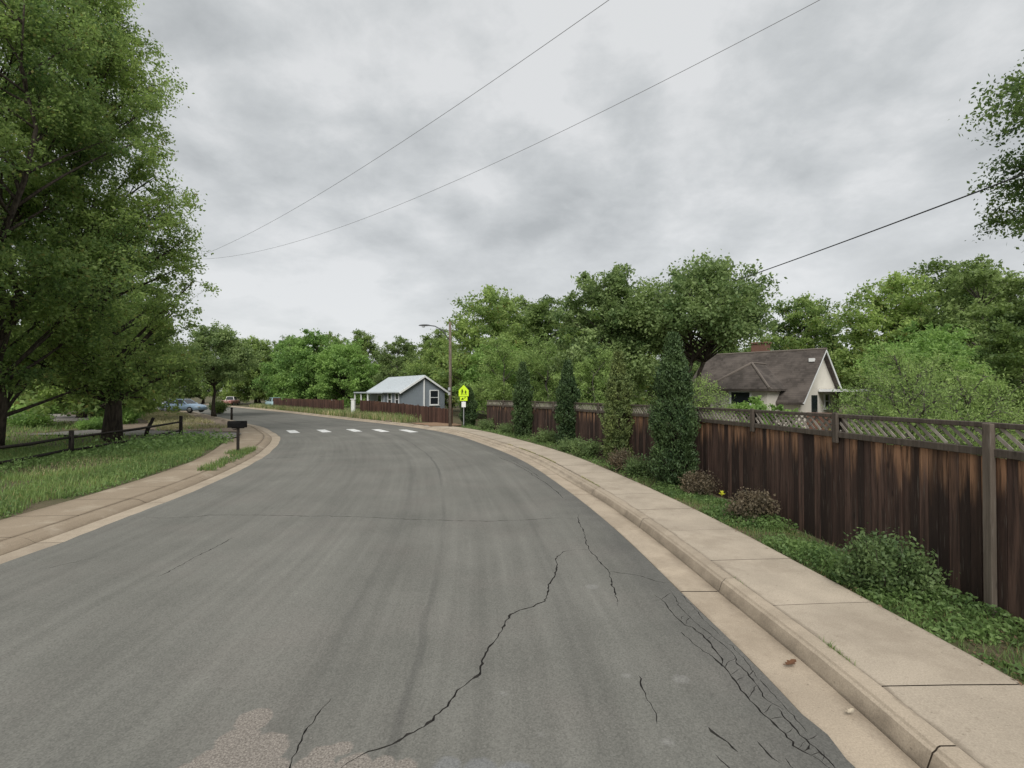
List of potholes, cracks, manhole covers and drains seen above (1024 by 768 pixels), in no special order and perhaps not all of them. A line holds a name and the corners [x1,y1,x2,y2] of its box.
crack [656,593,835,768]
crack [151,515,663,768]
